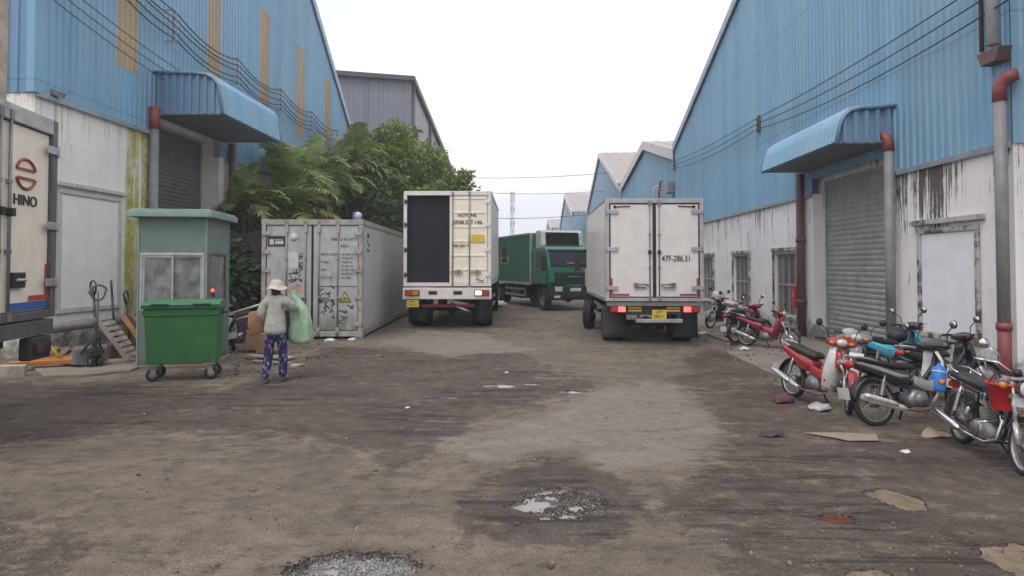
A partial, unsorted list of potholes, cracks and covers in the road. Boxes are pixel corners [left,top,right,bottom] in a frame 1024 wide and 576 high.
pothole [272,548,434,576]
pothole [503,484,615,522]
